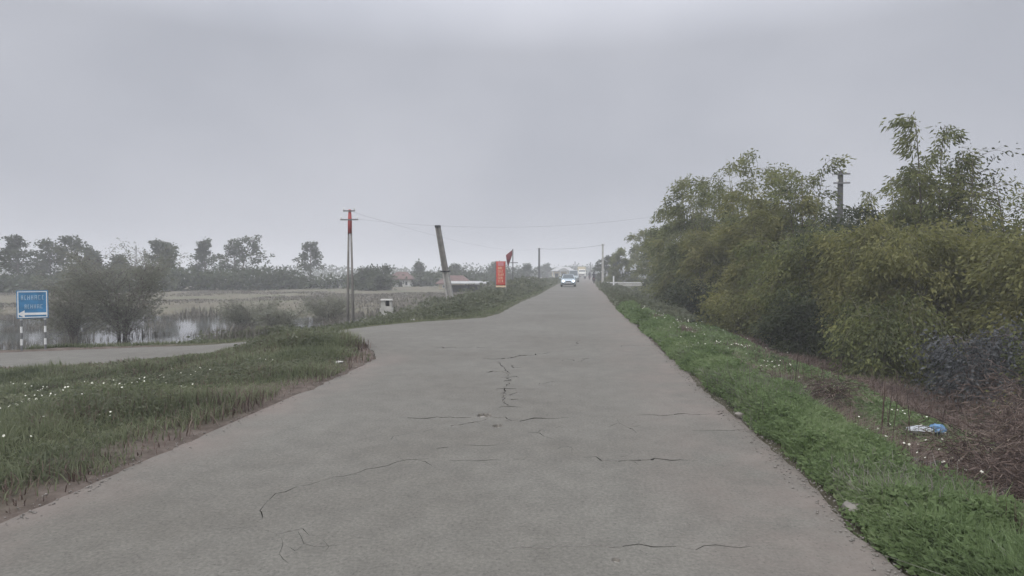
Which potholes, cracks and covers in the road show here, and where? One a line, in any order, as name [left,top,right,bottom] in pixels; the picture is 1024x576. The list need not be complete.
crack [241,353,567,563]
